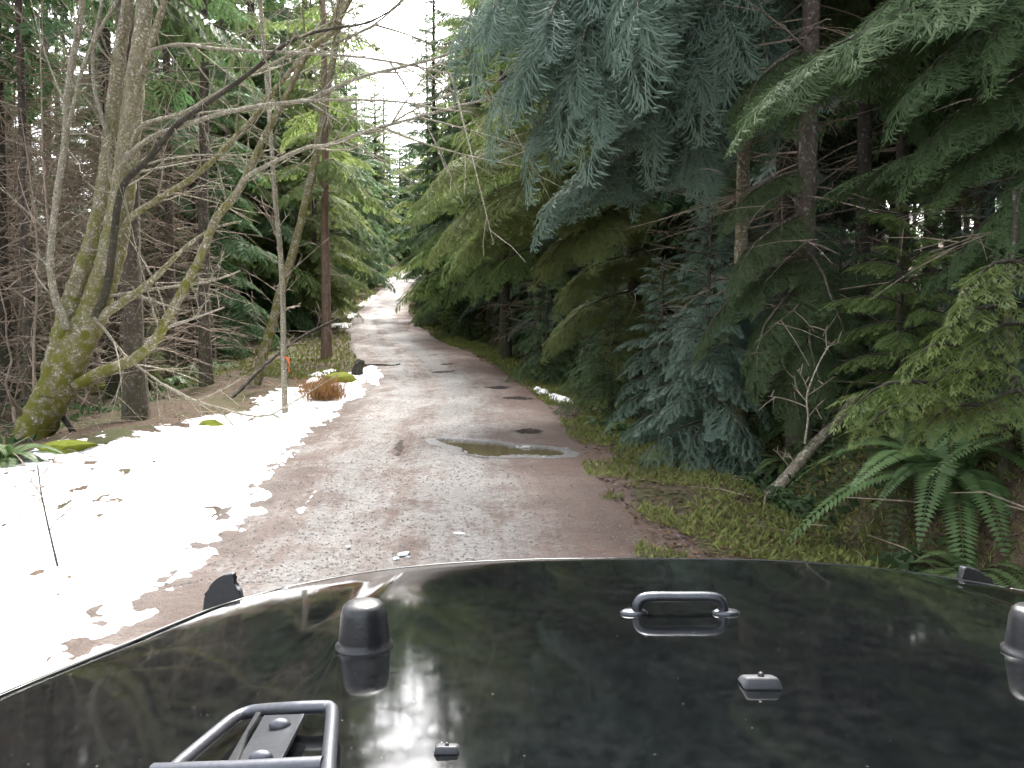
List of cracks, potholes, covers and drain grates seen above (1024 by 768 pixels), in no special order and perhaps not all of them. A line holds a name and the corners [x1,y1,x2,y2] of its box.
pothole [425,437,581,459]
